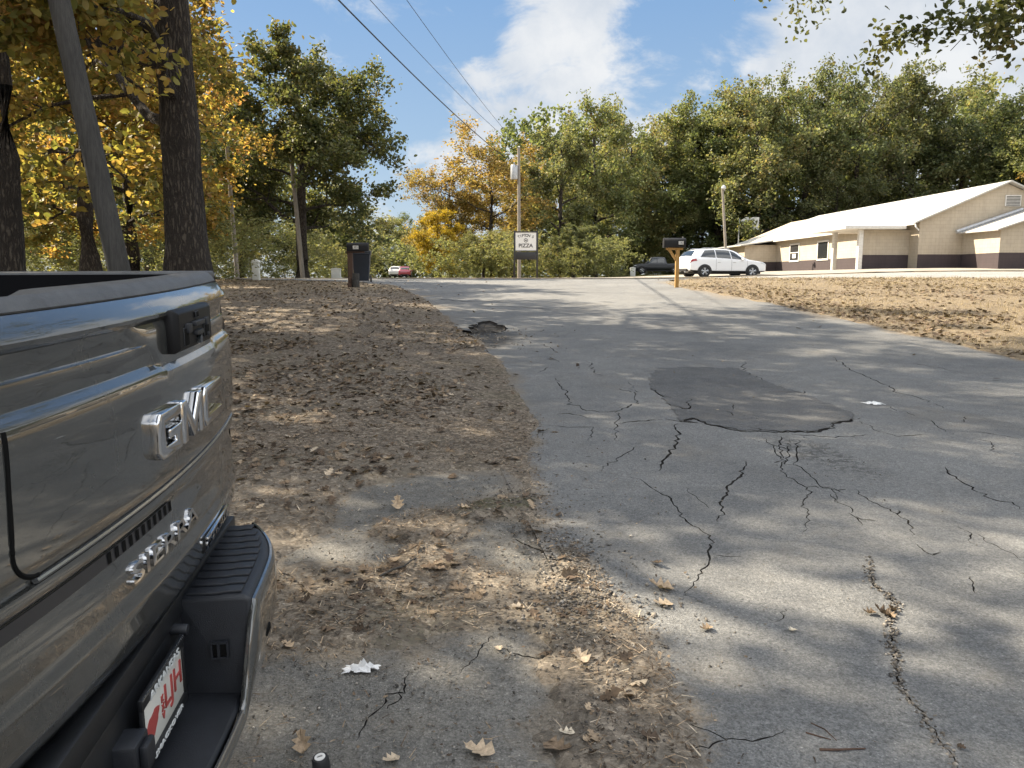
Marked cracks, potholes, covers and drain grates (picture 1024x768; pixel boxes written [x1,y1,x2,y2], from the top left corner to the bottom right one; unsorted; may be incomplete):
crack [945,468,1020,509]
crack [539,343,938,595]
pothole [462,321,508,335]
crack [869,561,958,768]
crack [691,724,784,749]
crack [461,637,543,671]
crack [356,675,408,741]
